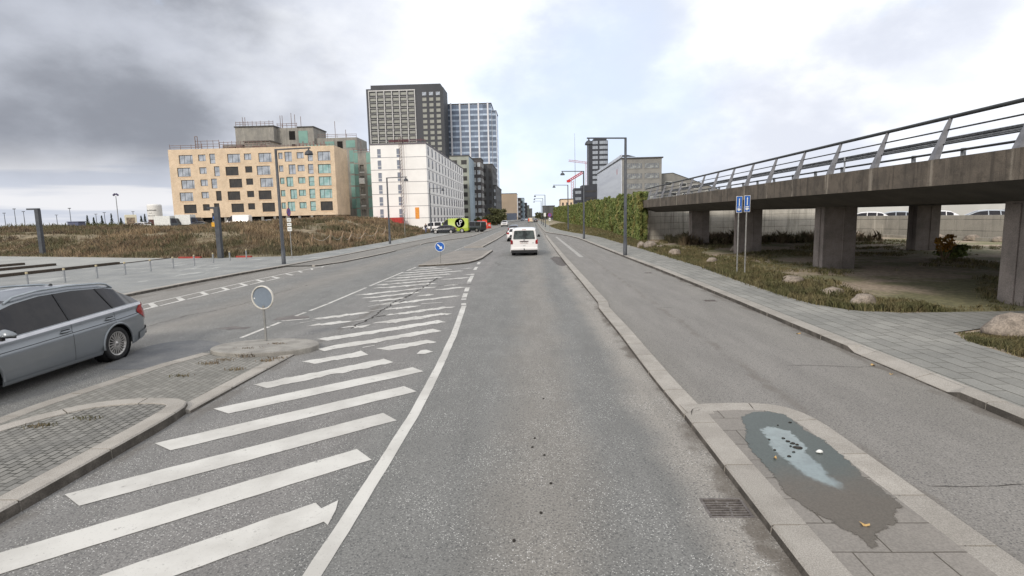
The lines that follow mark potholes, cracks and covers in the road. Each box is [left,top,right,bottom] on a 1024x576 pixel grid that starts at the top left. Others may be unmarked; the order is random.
drain grate [699,498,755,518]
crack [352,278,471,328]
